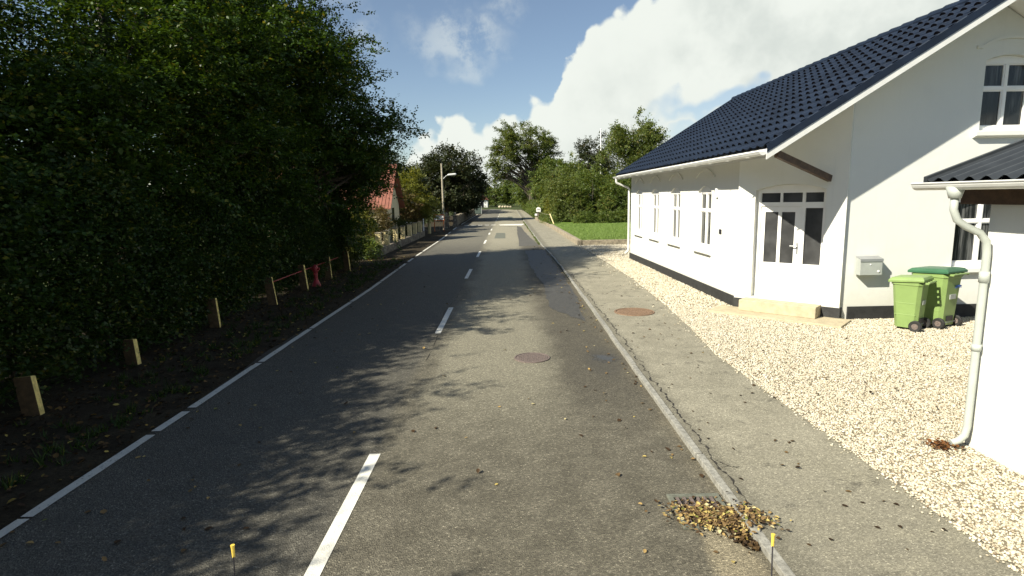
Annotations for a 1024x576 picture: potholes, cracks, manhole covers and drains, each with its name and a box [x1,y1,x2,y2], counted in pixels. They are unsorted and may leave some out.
manhole cover [614,308,655,316]
manhole cover [514,352,550,363]
drain grate [666,493,738,530]
